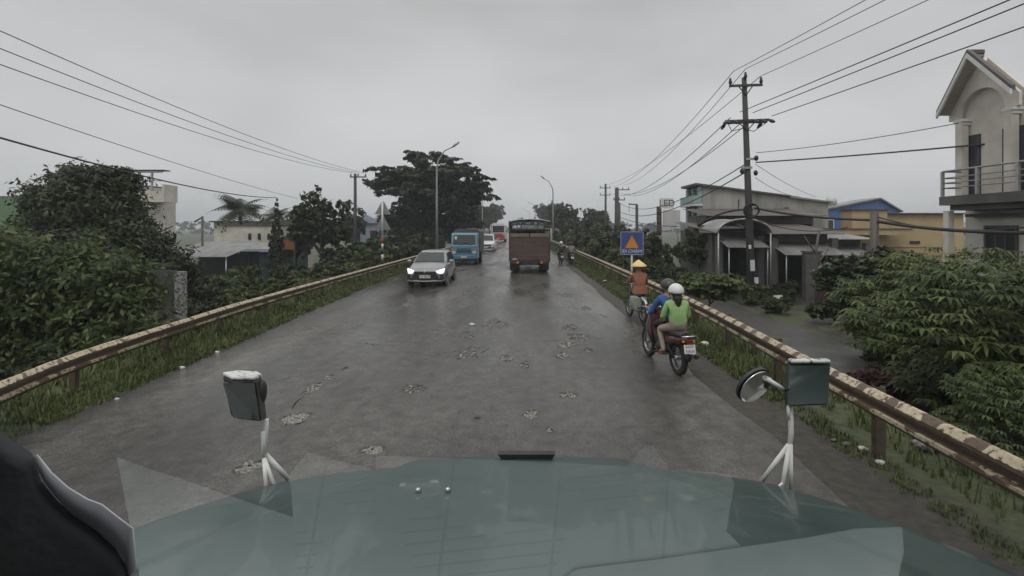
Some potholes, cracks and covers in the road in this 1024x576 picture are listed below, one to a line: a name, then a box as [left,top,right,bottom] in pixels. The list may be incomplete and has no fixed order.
pothole [225,459,271,476]
pothole [519,408,542,420]
pothole [277,410,314,427]
pothole [453,346,481,360]
pothole [298,382,326,395]
pothole [481,318,510,330]
pothole [400,384,432,396]
pothole [555,341,580,349]
pothole [555,390,581,399]
pothole [356,444,388,457]
